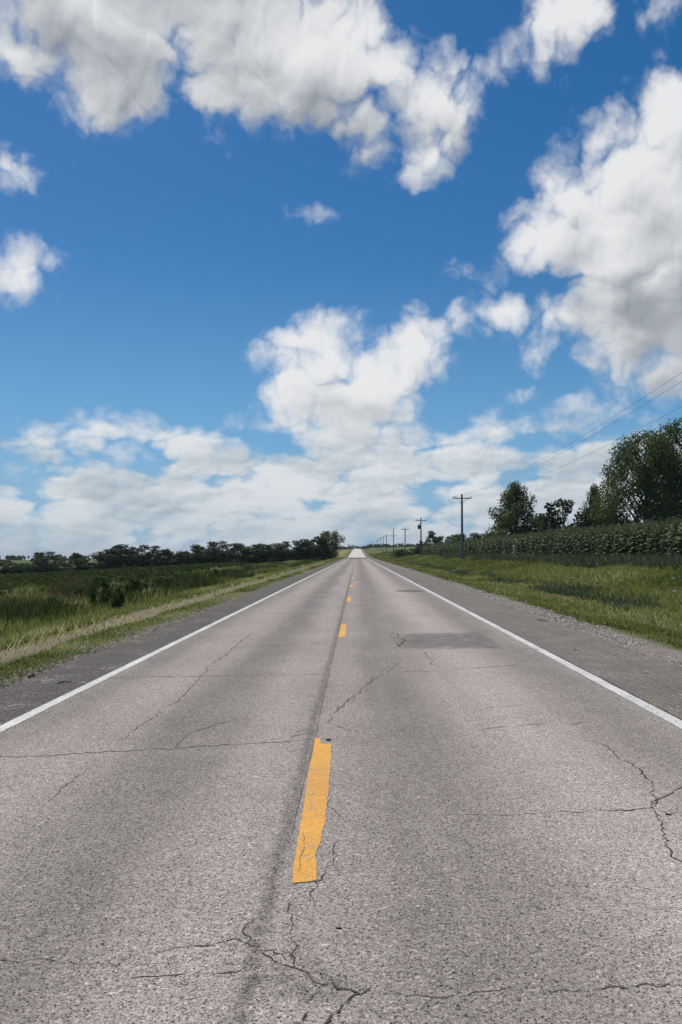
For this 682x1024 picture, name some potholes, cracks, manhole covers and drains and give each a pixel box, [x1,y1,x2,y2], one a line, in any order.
crack [0,841,400,1024]
crack [406,982,676,998]
crack [328,632,522,731]
crack [7,633,324,802]
crack [595,740,682,861]
